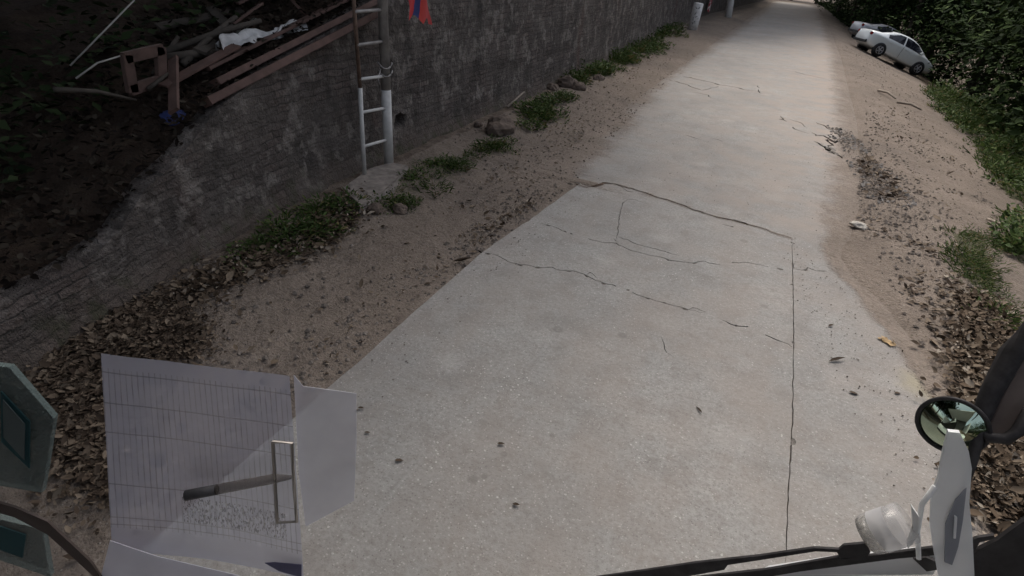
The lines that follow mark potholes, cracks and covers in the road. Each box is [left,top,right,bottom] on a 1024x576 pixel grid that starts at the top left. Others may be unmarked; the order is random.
crack [824,138,838,156]
crack [576,182,748,227]
crack [478,250,688,311]
